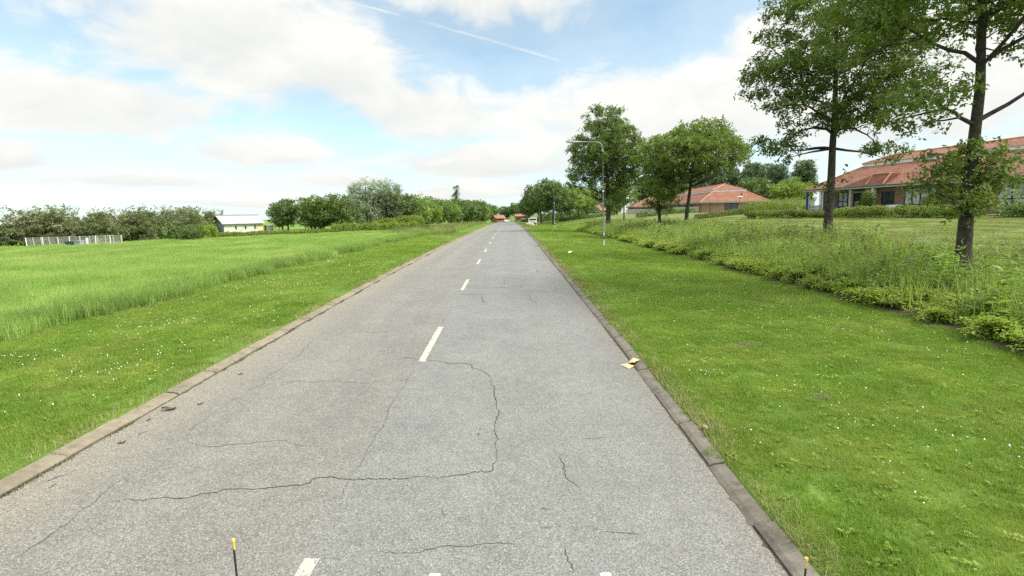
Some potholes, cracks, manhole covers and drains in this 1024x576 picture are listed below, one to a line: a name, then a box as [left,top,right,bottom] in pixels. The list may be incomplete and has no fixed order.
crack [362,542,526,553]
crack [8,472,130,563]
crack [187,340,409,447]
crack [107,357,500,503]
